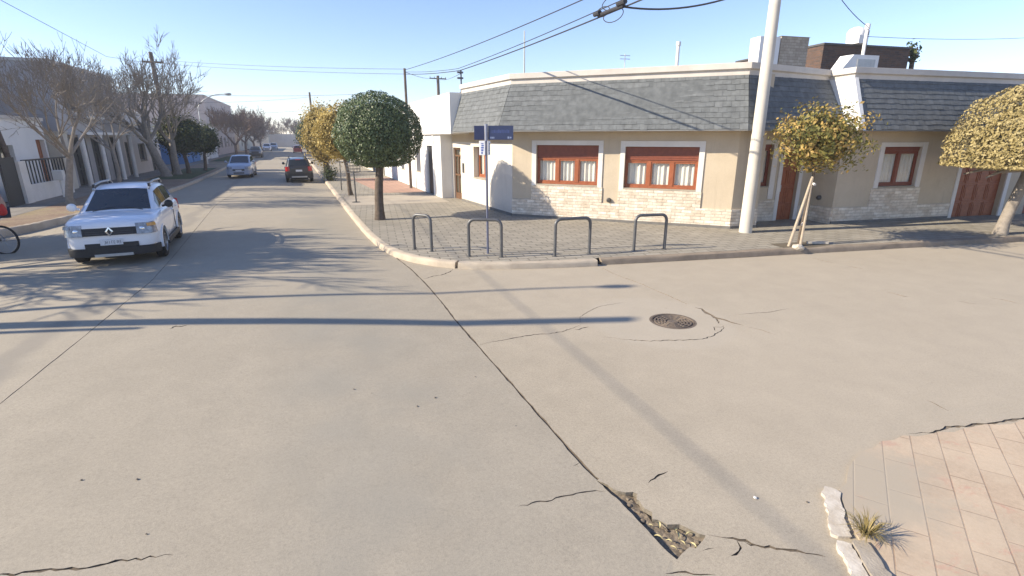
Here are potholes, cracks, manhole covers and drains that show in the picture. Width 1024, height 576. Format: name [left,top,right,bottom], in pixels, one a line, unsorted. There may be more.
crack [0,554,170,576]
crack [610,308,783,341]
crack [666,535,825,575]
pothole [596,480,706,559]
manhole cover [649,313,697,329]
crack [518,490,598,507]
crack [908,401,1024,434]
